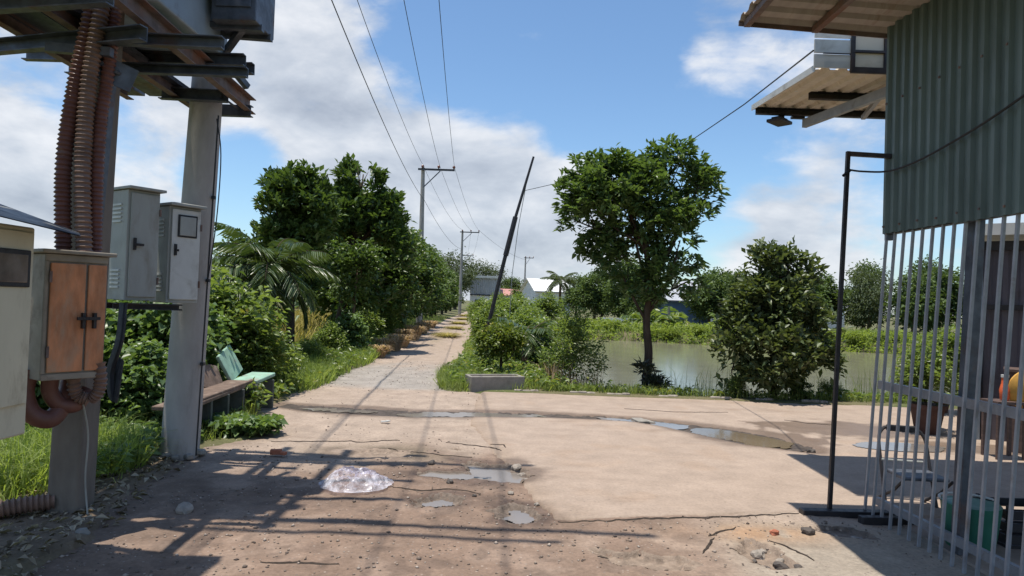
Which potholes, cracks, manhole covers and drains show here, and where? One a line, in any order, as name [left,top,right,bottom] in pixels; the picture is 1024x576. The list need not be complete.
pothole [486,502,542,524]
crack [271,440,506,458]
pothole [416,470,468,480]
pothole [733,537,799,571]
pothole [460,461,531,483]
crack [558,513,799,554]
pothole [408,492,465,508]
